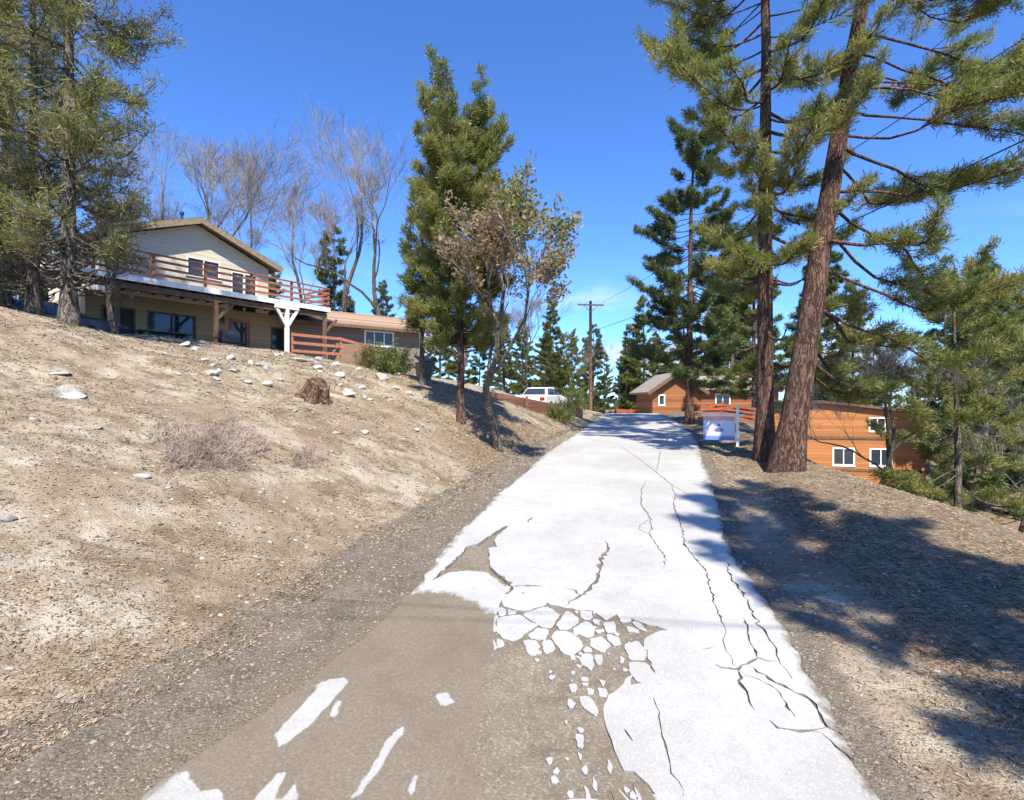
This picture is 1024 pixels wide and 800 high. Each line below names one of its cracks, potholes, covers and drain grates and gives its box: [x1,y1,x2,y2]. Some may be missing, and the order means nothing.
pothole [433,525,509,586]
crack [494,541,683,788]
pothole [473,647,655,800]
crack [625,449,870,787]
